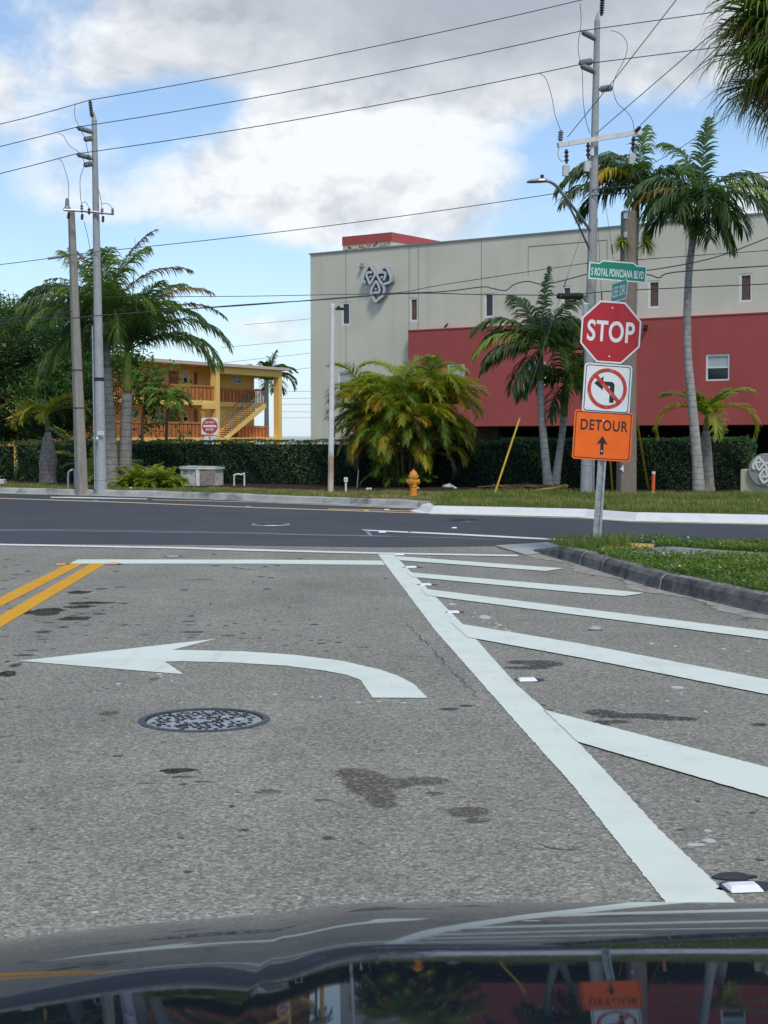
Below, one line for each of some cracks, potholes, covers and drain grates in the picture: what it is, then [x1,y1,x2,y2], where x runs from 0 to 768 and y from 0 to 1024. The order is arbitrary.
crack [397,625,479,698]
manhole cover [138,708,270,733]
